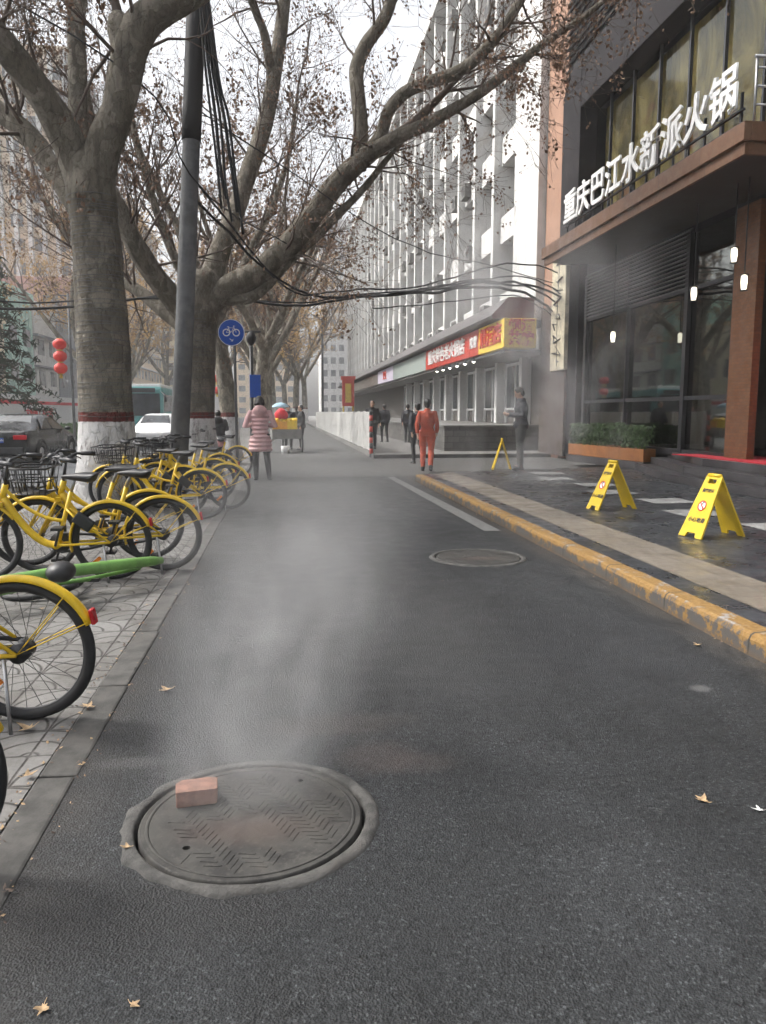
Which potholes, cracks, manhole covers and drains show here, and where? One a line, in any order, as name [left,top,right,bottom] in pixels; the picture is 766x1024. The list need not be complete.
manhole cover [429,548,527,567]
manhole cover [119,760,380,900]
